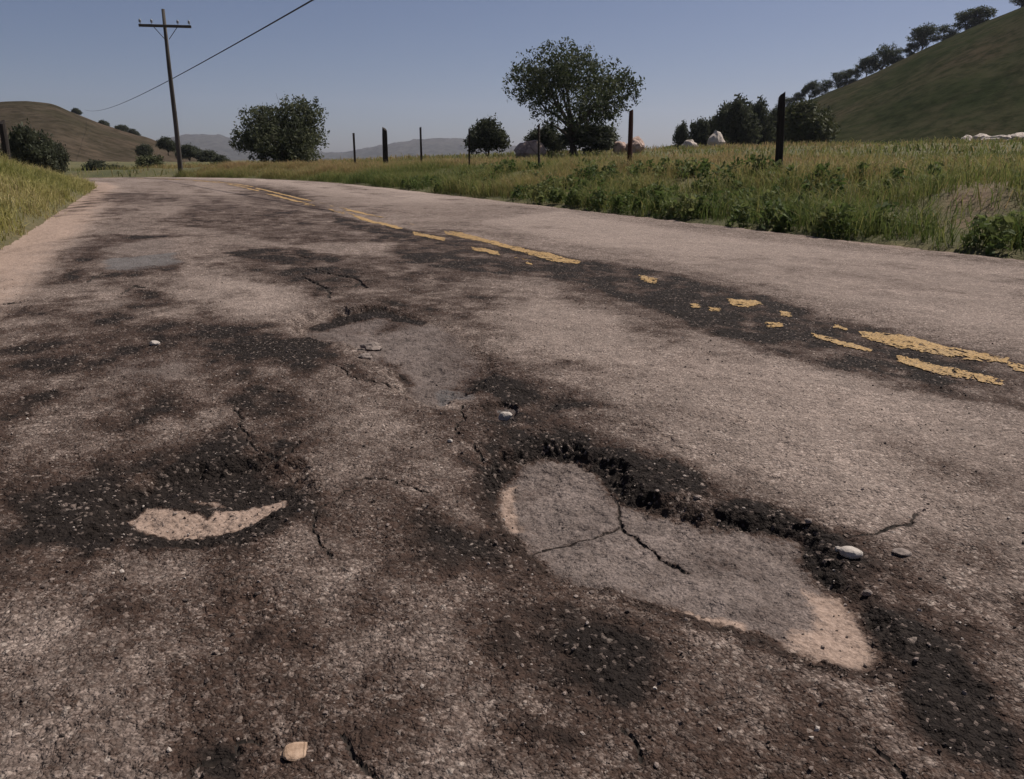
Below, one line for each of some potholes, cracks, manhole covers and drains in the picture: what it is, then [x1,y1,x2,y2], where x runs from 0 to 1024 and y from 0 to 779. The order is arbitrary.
crack [229,253,367,298]
pothole [477,437,911,679]
crack [842,513,918,539]
crack [529,494,689,574]
crack [232,399,302,462]
